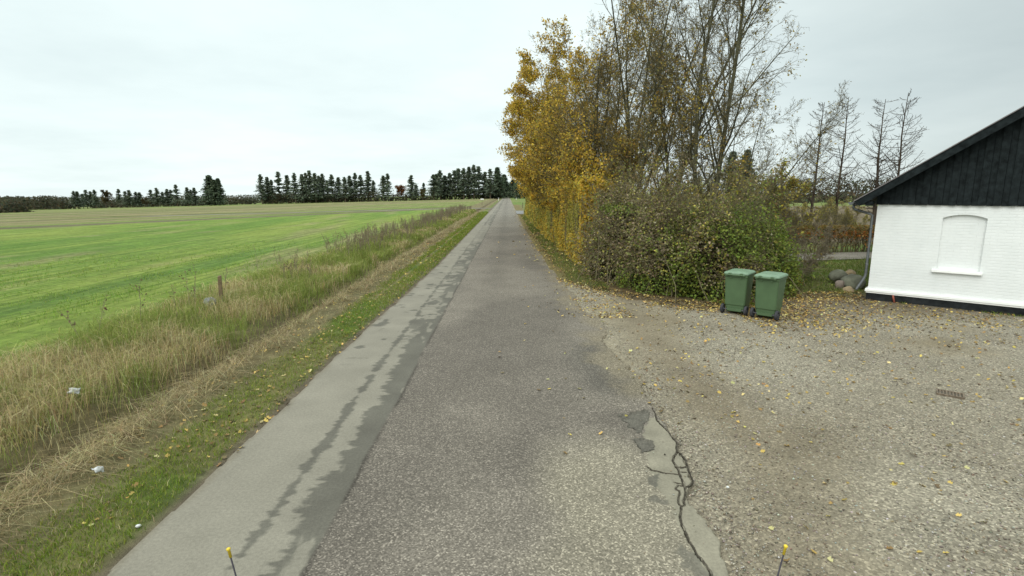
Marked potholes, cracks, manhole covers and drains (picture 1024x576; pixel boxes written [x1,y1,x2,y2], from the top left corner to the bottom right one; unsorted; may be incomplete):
crack [646,407,713,576]
drain grate [936,389,965,400]
